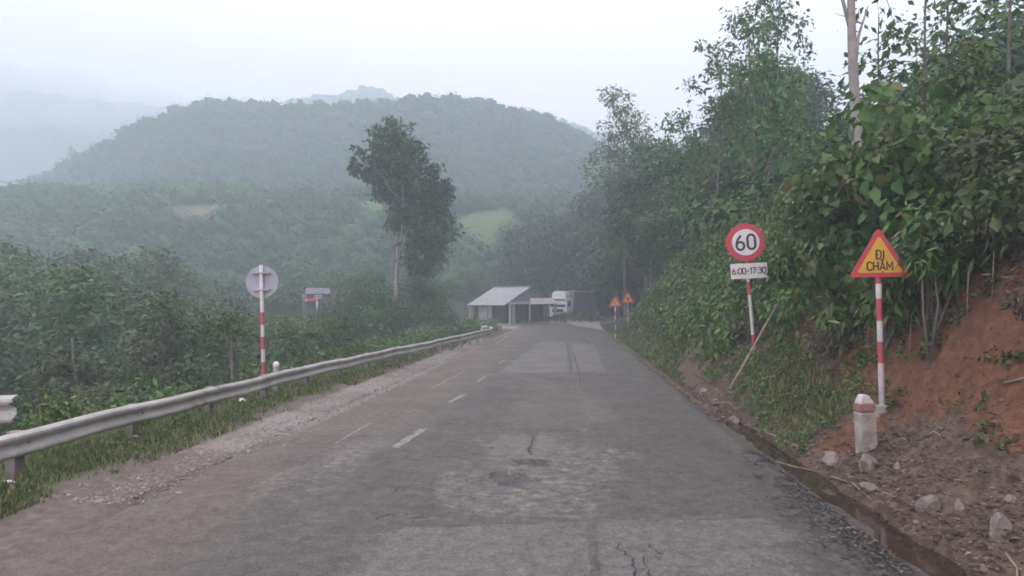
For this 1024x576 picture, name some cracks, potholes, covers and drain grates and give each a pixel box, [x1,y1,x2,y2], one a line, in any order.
pothole [510,458,554,466]
crack [479,514,723,576]
pothole [486,469,534,488]
crack [525,436,537,455]
